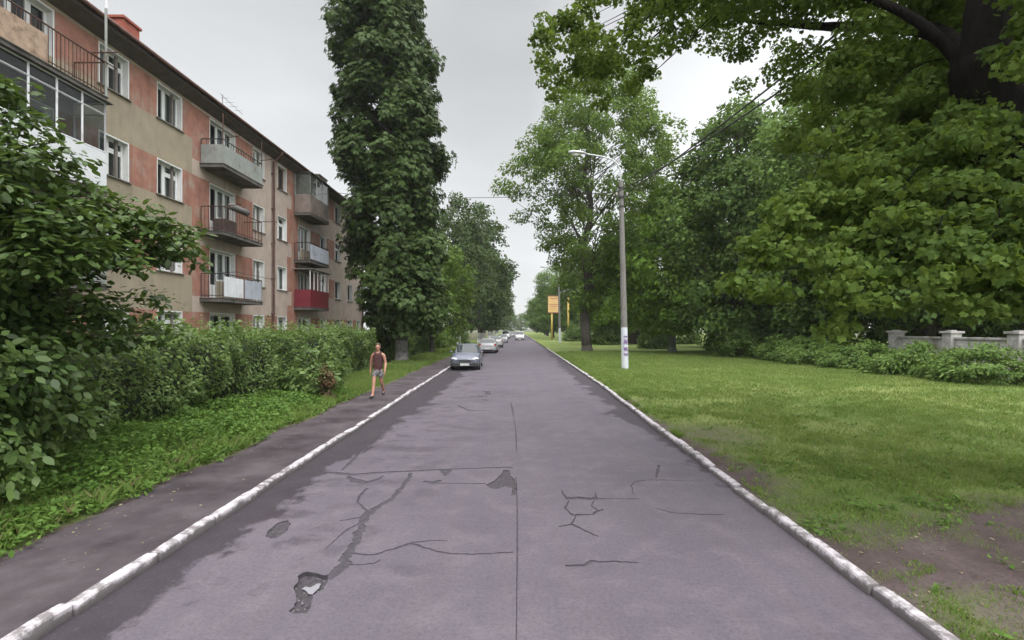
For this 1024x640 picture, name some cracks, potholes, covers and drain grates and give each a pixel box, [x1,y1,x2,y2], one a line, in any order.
crack [459,391,490,411]
pothole [289,571,328,614]
crack [559,465,682,537]
pothole [486,470,517,495]
pothole [265,520,291,539]
